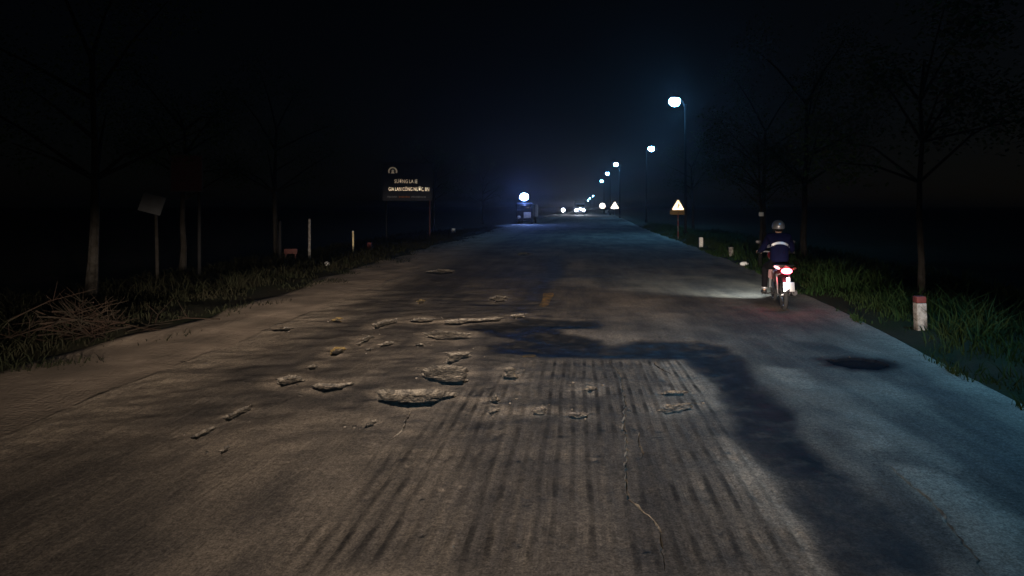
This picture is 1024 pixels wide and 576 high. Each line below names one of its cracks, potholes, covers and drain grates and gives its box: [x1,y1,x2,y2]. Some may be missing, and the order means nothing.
pothole [442,352,472,365]
pothole [501,367,518,381]
pothole [567,412,589,420]
pothole [657,402,694,415]
pothole [420,365,469,386]
pothole [375,388,458,408]
pothole [190,426,216,440]
pothole [827,358,890,370]
pothole [423,330,472,340]
crack [611,363,671,572]
pothole [222,404,254,422]
crack [389,412,410,441]
